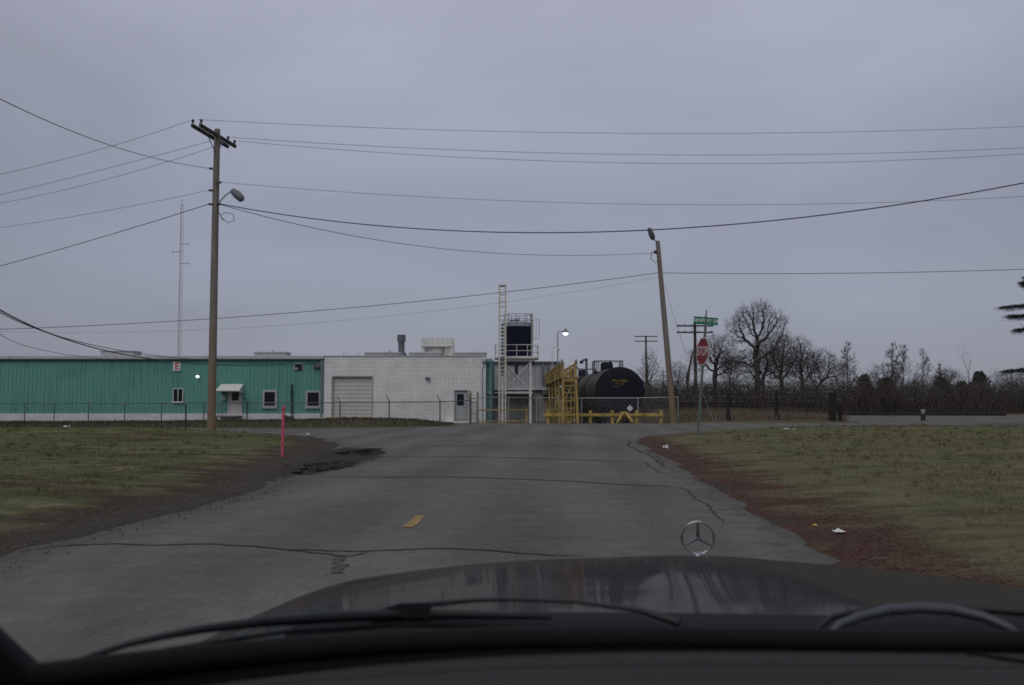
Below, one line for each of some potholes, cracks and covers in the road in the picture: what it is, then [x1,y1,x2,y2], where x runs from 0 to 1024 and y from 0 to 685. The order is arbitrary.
pothole [289,461,357,475]
crack [320,441,724,522]
pothole [333,448,384,456]
crack [26,543,579,573]
